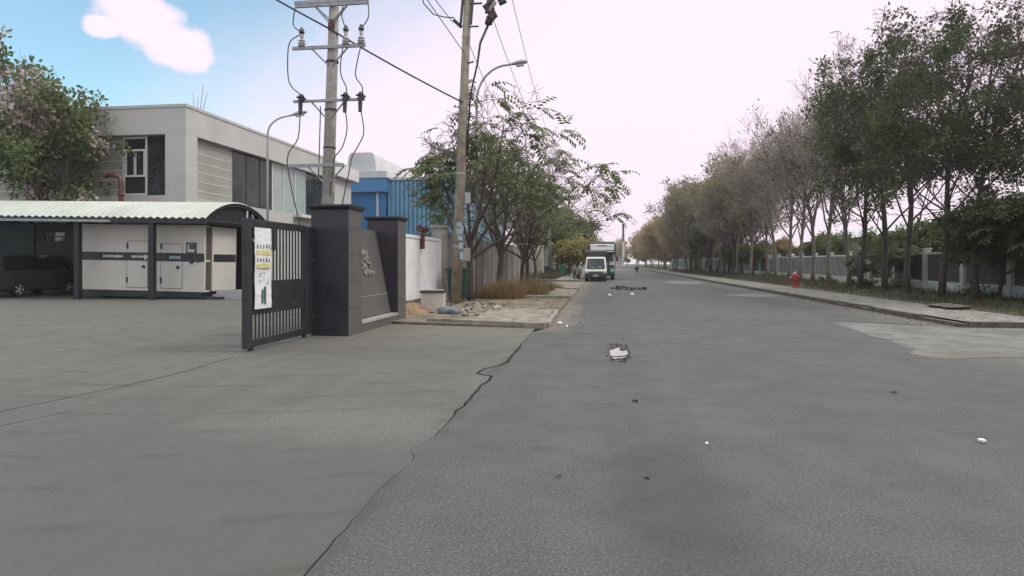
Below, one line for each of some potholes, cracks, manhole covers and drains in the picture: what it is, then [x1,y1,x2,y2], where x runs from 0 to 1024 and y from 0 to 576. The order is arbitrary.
manhole cover [924,303,972,323]
crack [303,333,531,576]
pothole [606,343,631,363]
